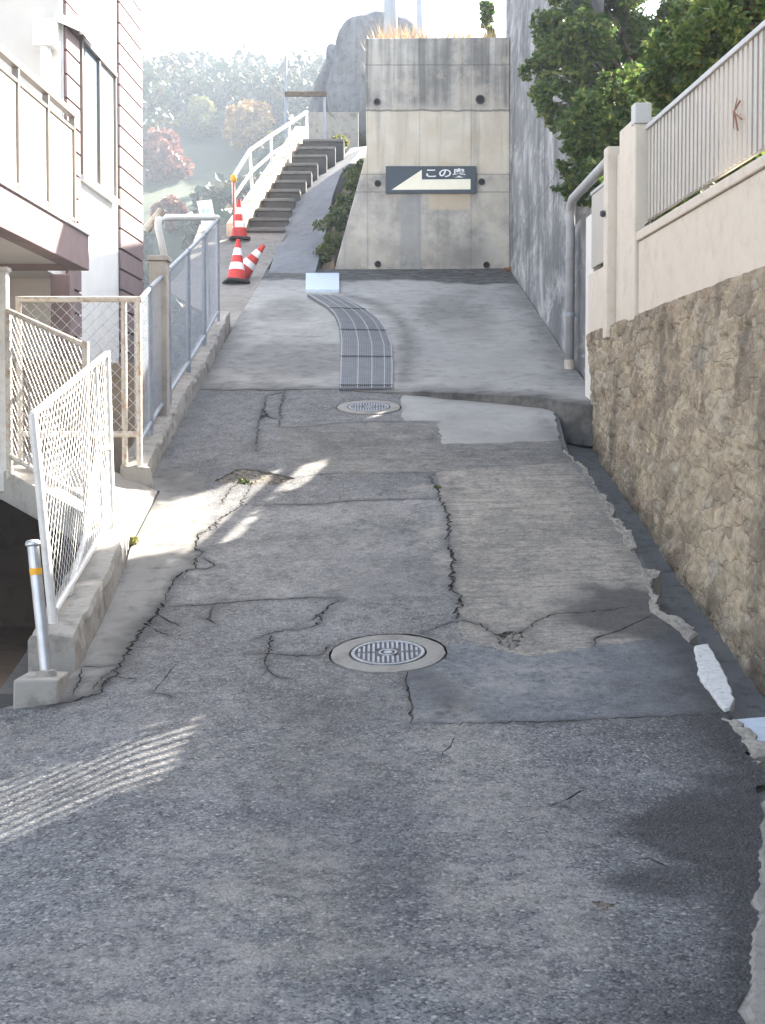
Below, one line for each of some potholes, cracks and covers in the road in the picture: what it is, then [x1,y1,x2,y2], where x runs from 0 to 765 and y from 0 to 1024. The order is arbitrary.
manhole cover [337,400,400,415]
crack [56,484,250,705]
crack [525,606,650,646]
crack [255,391,286,447]
drain grate [307,293,393,391]
pothole [215,468,294,486]
crack [251,600,340,679]
manhole cover [330,635,446,674]
crack [310,472,495,635]
